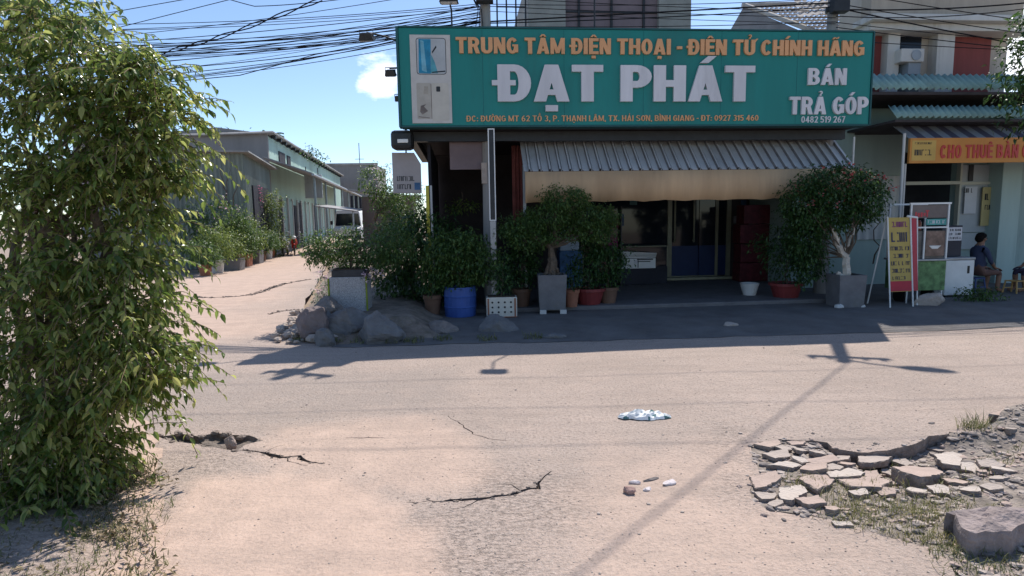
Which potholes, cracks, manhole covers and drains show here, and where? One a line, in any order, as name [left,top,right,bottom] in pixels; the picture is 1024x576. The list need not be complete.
pothole [159,430,263,452]
crack [409,471,552,510]
crack [189,279,311,315]
crack [240,445,324,466]
